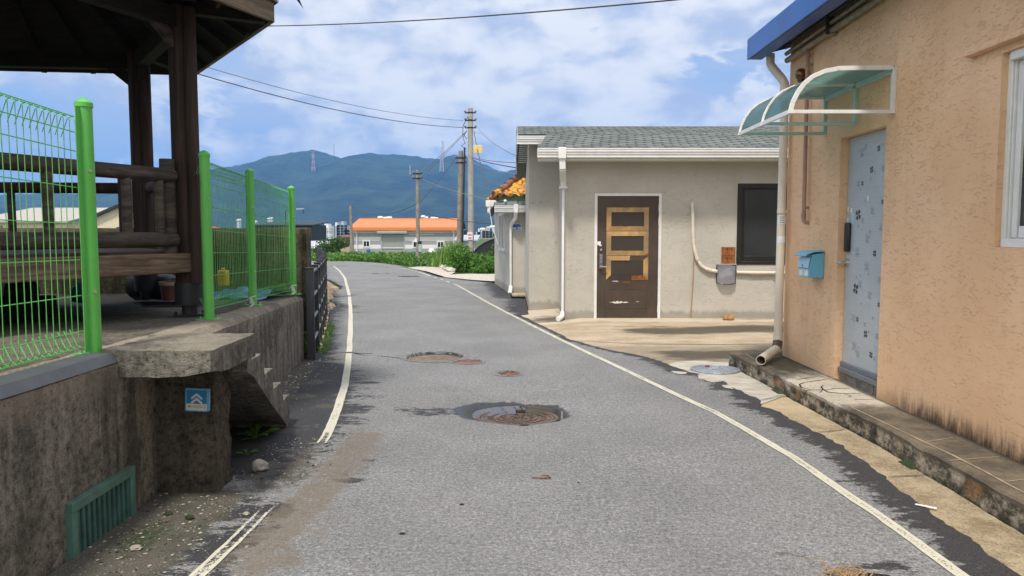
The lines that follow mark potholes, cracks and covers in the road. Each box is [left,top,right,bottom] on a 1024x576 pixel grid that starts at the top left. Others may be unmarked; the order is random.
manhole cover [690,364,740,375]
manhole cover [476,410,559,426]
crack [799,376,858,400]
